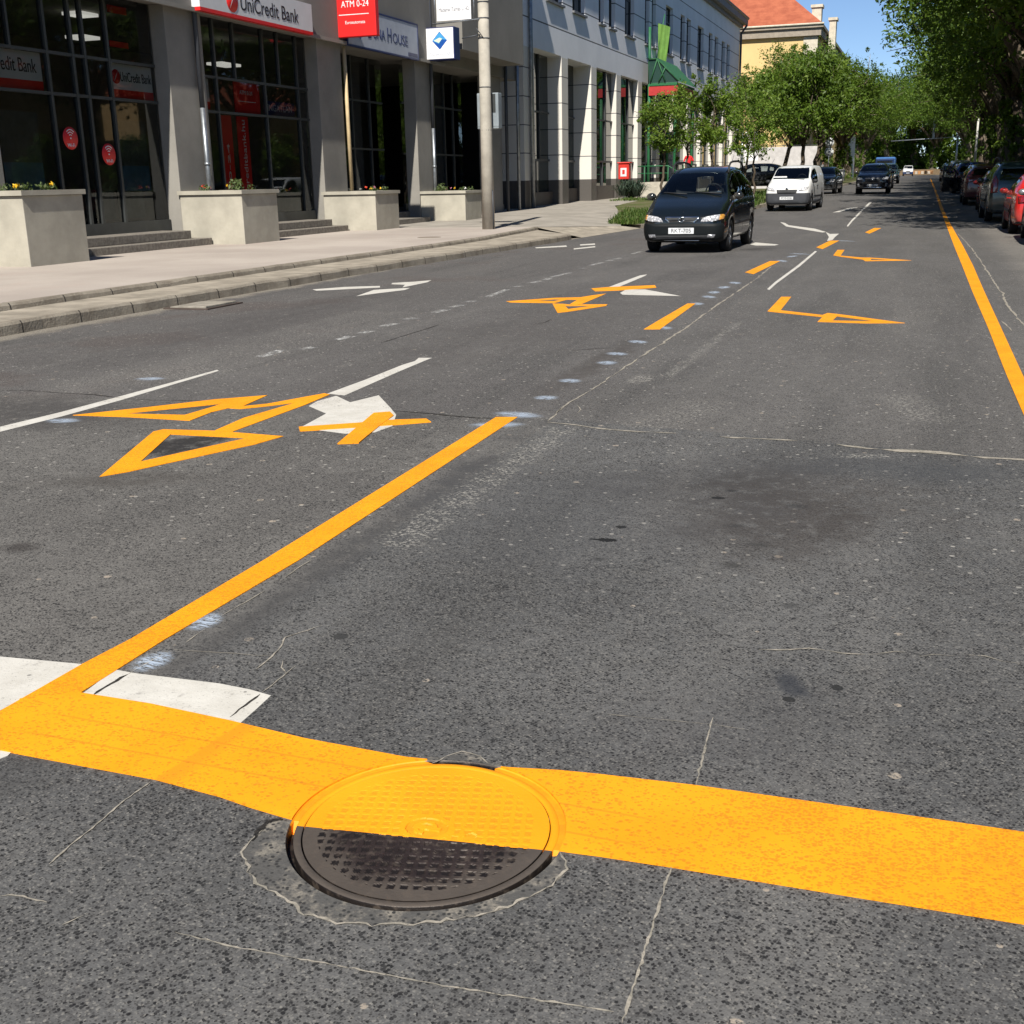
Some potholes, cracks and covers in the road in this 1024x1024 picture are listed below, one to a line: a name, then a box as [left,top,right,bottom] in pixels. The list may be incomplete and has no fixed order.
crack [2,894,614,1012]
manhole cover [242,752,568,925]
crack [760,648,1015,663]
crack [49,782,150,864]
crack [174,625,322,717]
